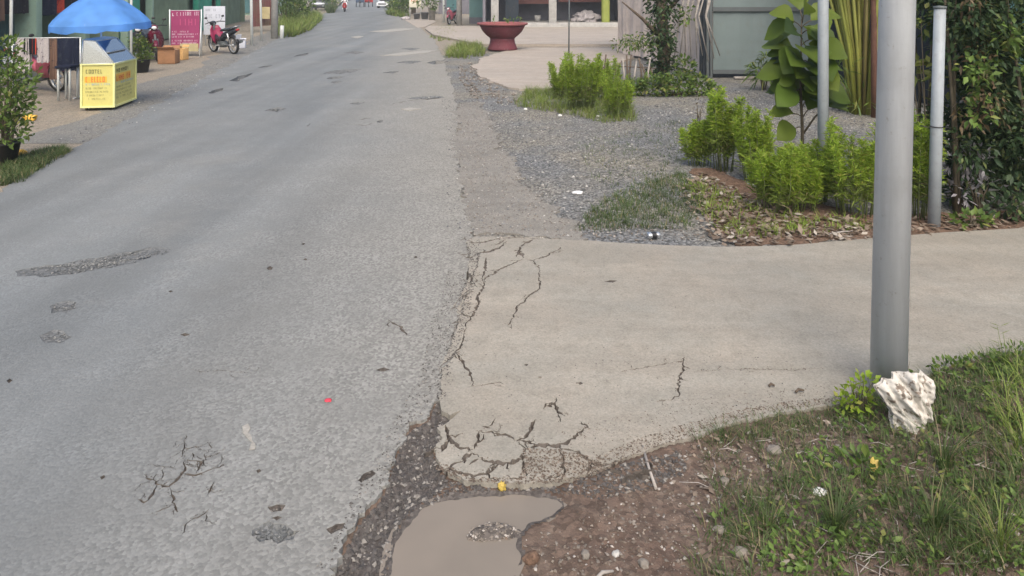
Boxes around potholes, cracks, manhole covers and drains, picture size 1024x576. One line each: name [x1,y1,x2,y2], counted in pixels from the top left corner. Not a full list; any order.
crack [139,436,226,533]
crack [424,396,654,484]
pothole [379,490,567,576]
crack [439,235,562,386]
crack [622,357,690,405]
pothole [335,403,449,576]
